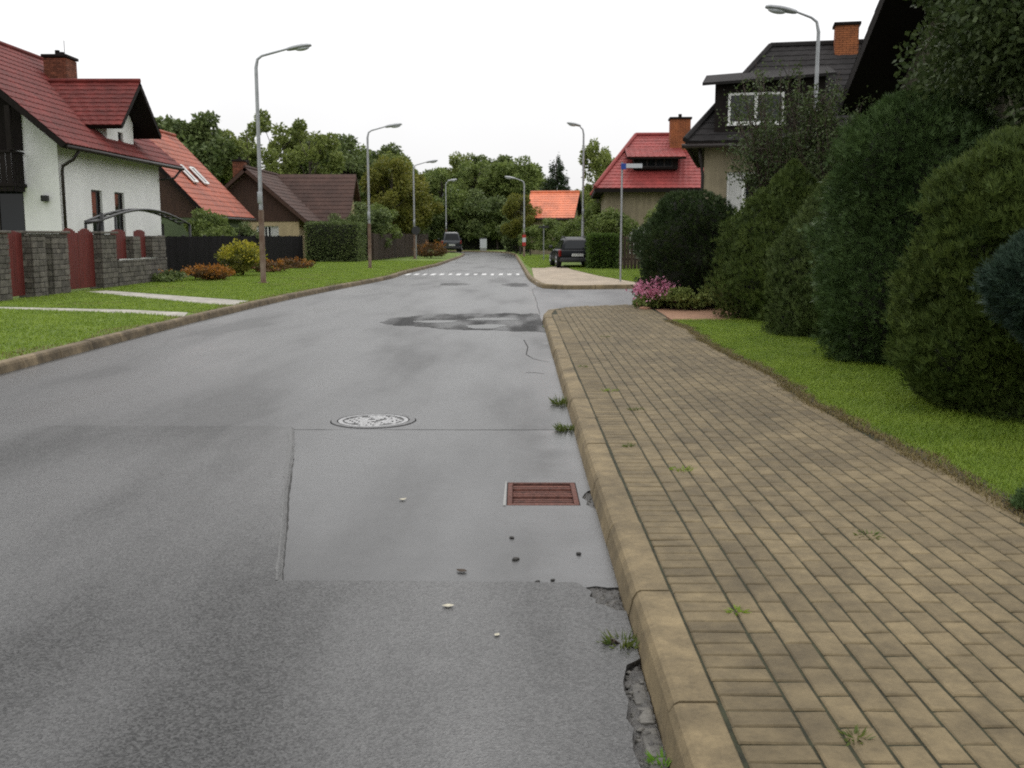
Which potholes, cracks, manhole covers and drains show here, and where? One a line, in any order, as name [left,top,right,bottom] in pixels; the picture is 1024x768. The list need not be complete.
drain grate [503,481,580,506]
pothole [624,664,669,768]
pothole [572,585,624,611]
manhole cover [331,413,415,429]
